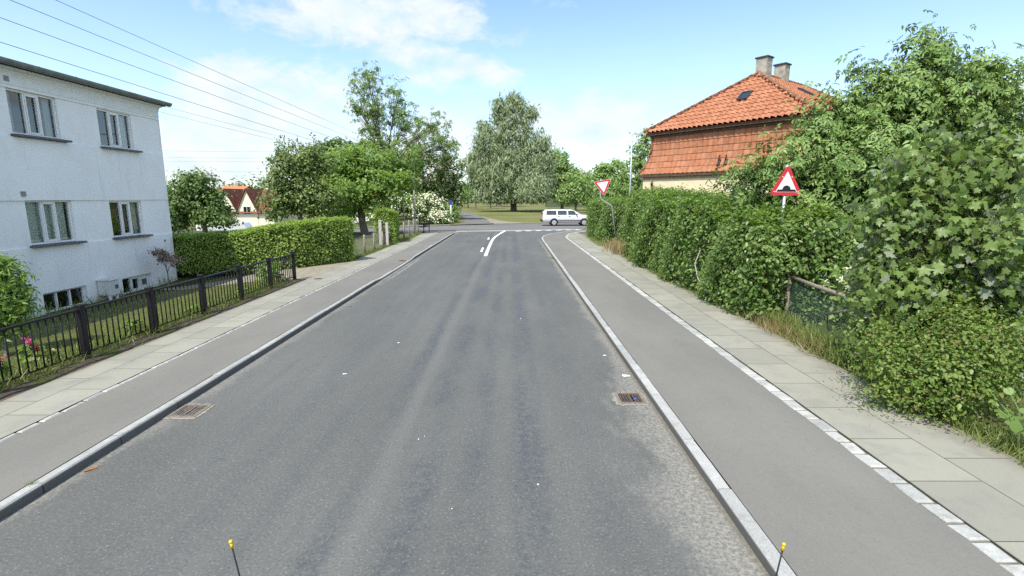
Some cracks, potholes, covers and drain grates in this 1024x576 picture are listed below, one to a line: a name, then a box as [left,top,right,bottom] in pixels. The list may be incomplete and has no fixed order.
drain grate [161,403,215,420]
drain grate [612,391,650,406]
